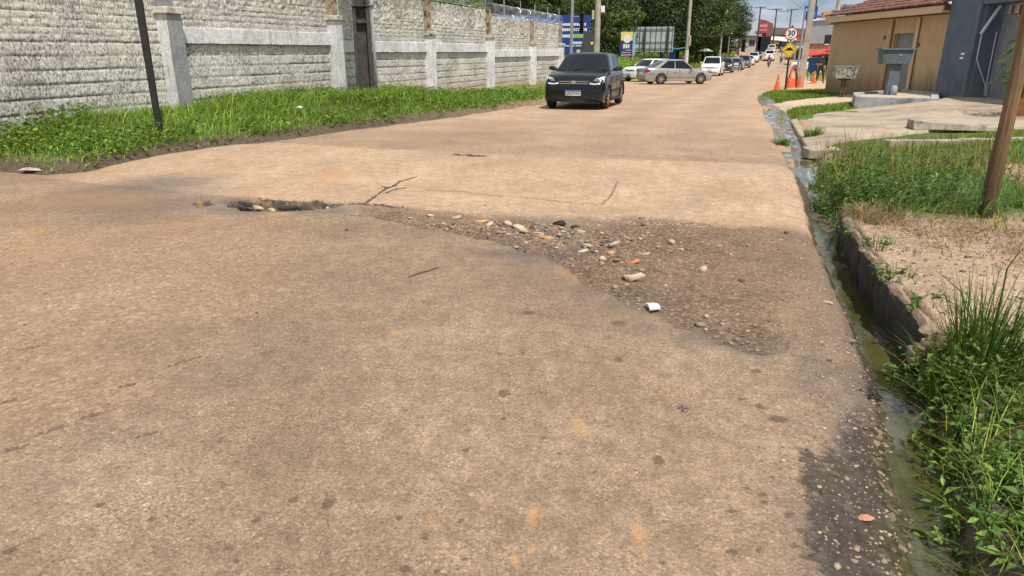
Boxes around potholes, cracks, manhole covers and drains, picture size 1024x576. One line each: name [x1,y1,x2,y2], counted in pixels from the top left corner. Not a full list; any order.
pothole [225,198,343,213]
crack [520,181,619,205]
pothole [358,206,826,357]
crack [347,176,503,216]
pothole [192,200,215,208]
